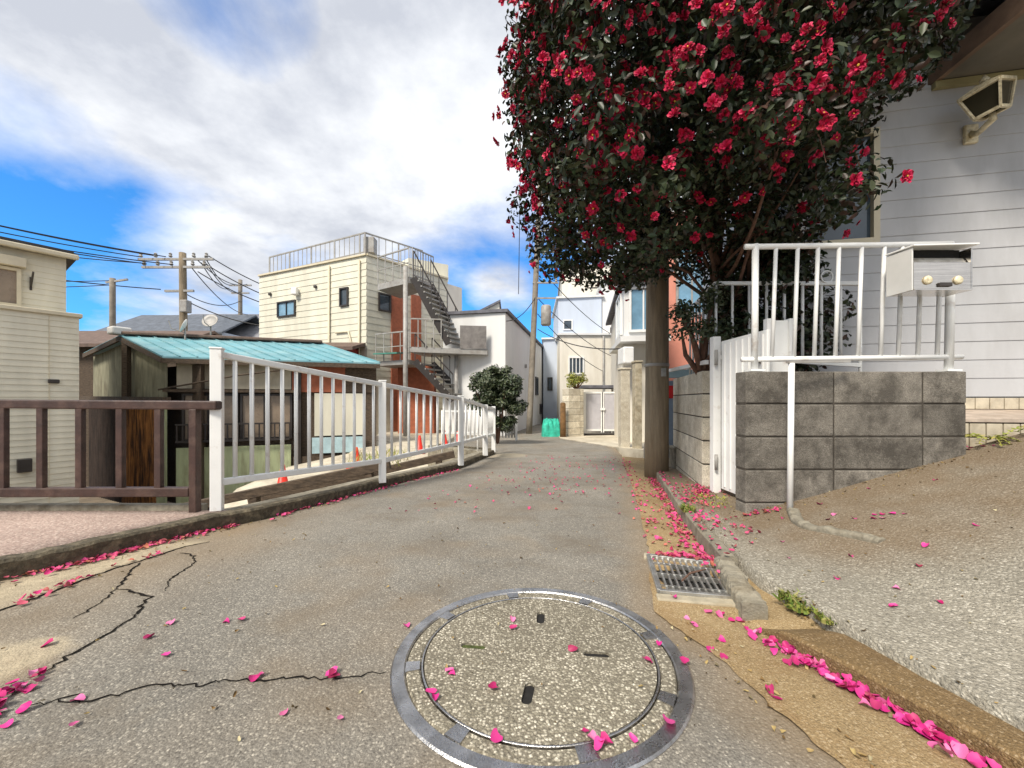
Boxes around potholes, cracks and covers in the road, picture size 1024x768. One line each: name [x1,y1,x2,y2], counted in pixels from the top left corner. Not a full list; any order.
drain grate [644,553,735,608]
manhole cover [390,588,695,768]
crack [0,542,385,706]
